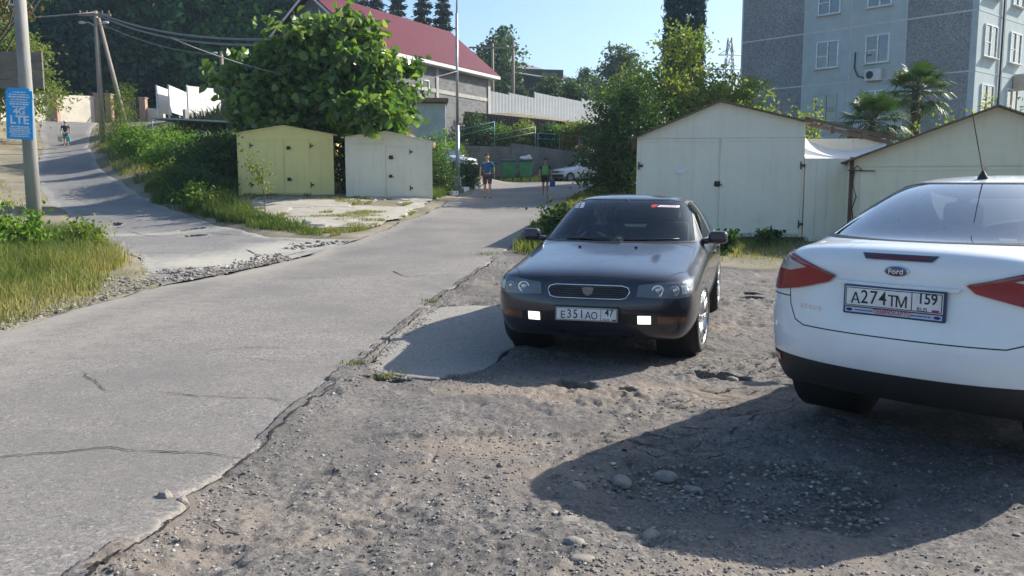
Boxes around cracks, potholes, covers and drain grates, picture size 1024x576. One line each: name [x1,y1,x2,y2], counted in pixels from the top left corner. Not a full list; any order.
pothole [543,377,606,394]
pothole [675,368,761,383]
crack [4,374,346,576]
